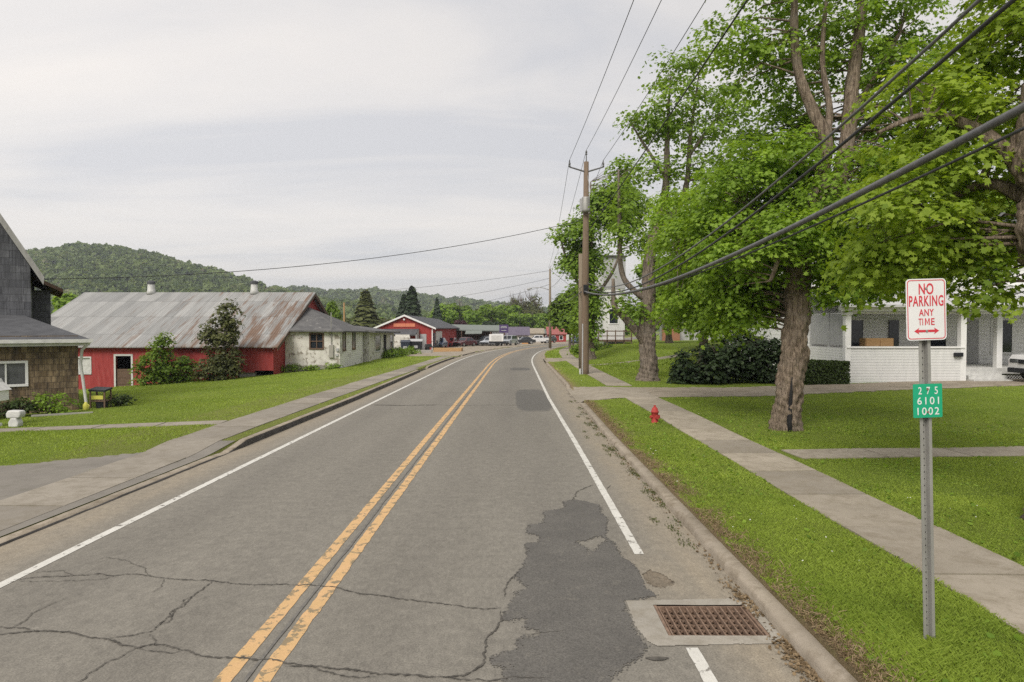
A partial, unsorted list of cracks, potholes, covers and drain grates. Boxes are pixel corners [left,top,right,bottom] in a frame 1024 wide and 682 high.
drain grate [626,597,785,646]
crack [0,557,563,682]
